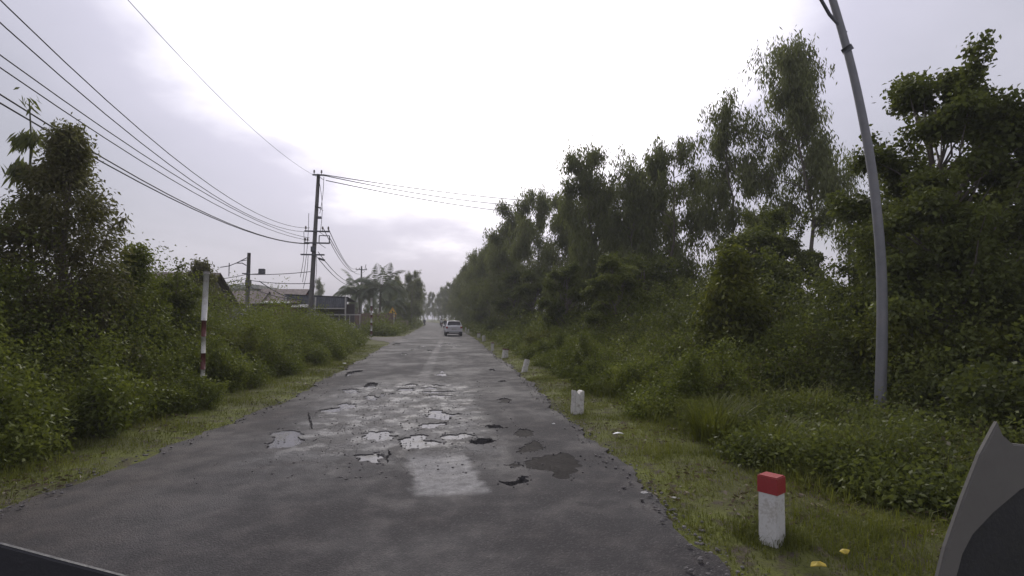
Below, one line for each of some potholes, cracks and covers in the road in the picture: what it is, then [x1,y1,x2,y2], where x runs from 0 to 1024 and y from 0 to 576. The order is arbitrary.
pothole [497,475,532,488]
pothole [397,434,442,451]
pothole [349,451,386,464]
pothole [361,430,398,442]
pothole [425,409,462,420]
pothole [465,437,497,445]
pothole [264,428,306,448]
